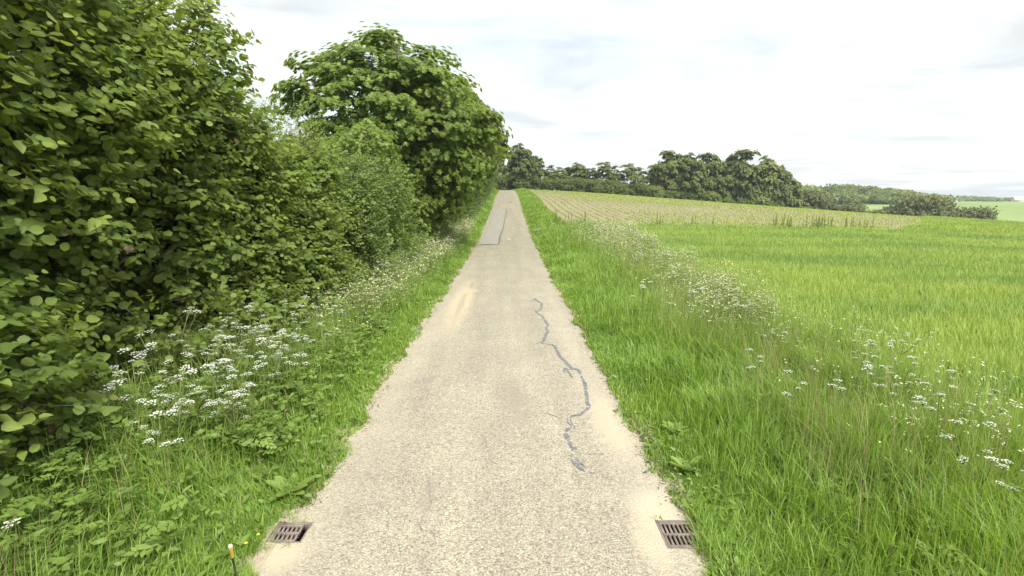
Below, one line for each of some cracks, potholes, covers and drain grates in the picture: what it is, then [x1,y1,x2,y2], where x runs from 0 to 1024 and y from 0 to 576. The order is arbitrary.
drain grate [655,520,704,549]
drain grate [267,522,313,543]
